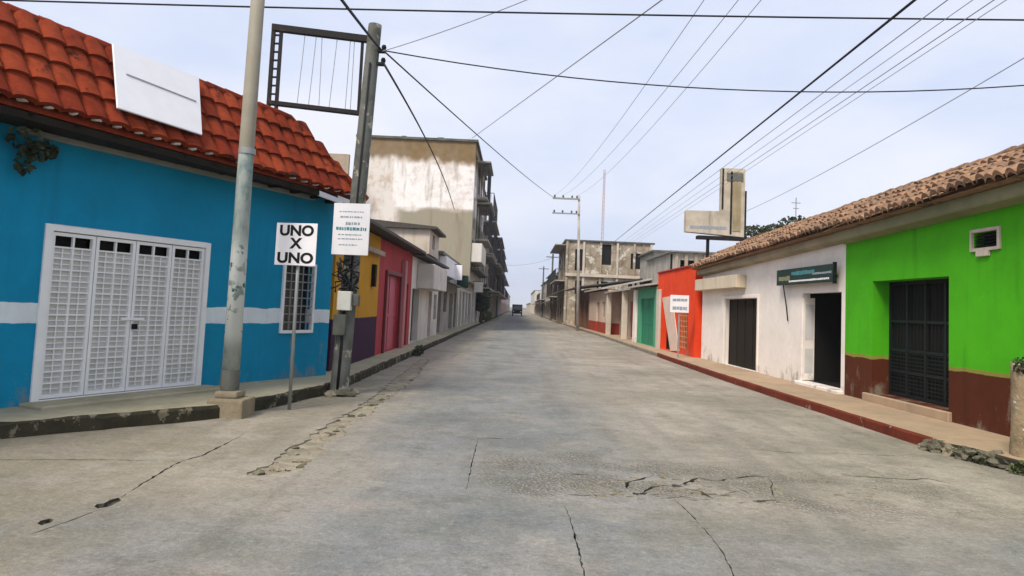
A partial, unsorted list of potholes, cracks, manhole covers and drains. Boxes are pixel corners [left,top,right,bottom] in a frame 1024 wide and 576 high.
pothole [94,498,121,508]
crack [540,464,878,576]
crack [833,469,954,485]
